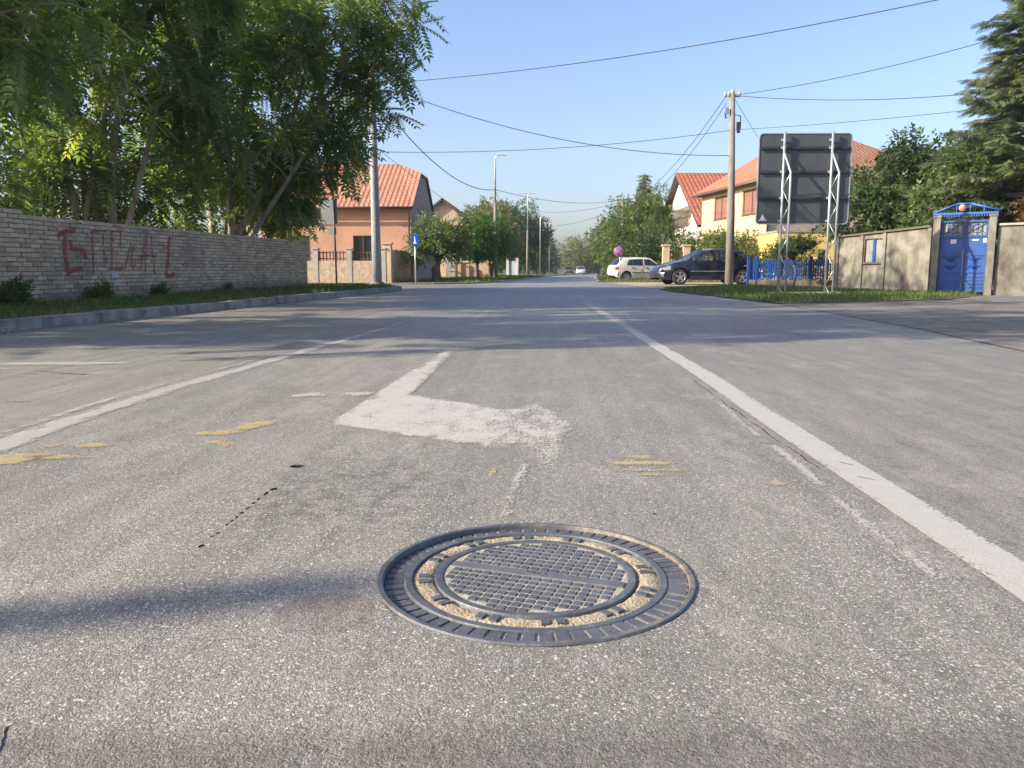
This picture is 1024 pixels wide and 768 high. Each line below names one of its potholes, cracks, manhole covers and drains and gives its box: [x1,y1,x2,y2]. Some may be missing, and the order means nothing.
crack [0,726,9,759]
manhole cover [376,523,697,647]
crack [692,379,820,469]
